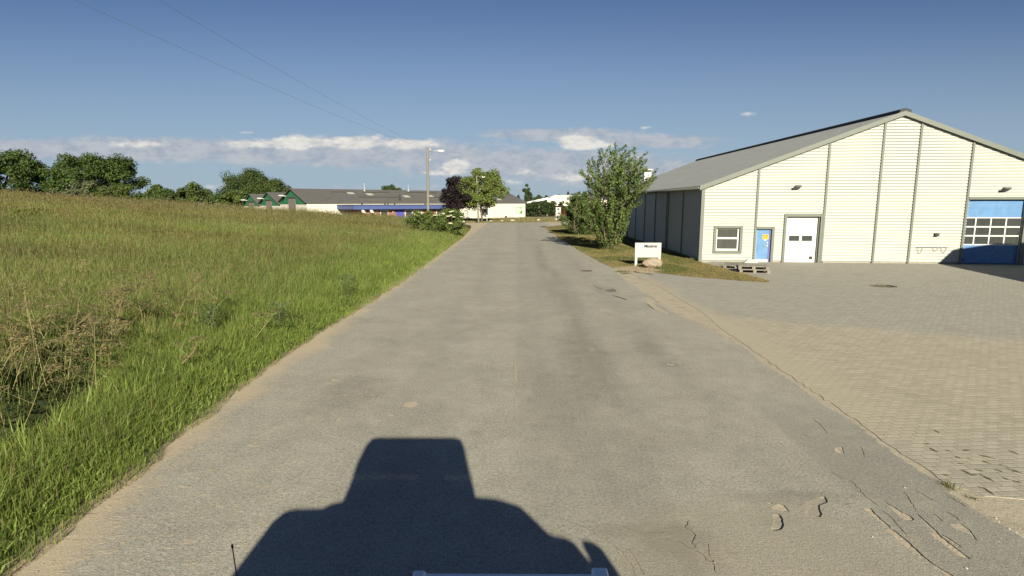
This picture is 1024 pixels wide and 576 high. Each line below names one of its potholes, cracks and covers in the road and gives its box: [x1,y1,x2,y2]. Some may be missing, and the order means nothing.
crack [831,472,916,535]
pothole [771,513,784,531]
crack [541,515,716,576]
pothole [799,496,828,517]
